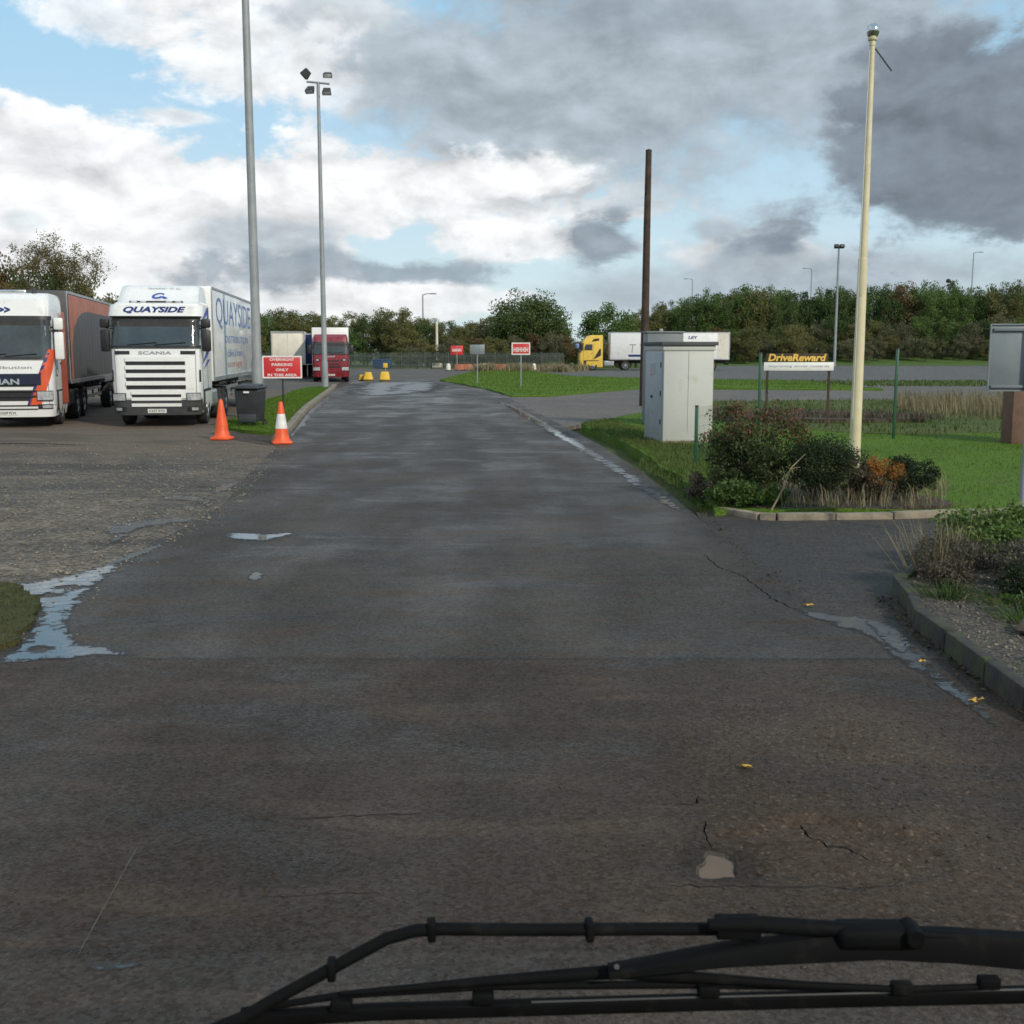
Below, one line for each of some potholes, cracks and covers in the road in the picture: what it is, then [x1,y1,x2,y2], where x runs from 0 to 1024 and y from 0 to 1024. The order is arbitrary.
pothole [696,851,738,879]
crack [663,795,869,861]
crack [704,555,799,611]
